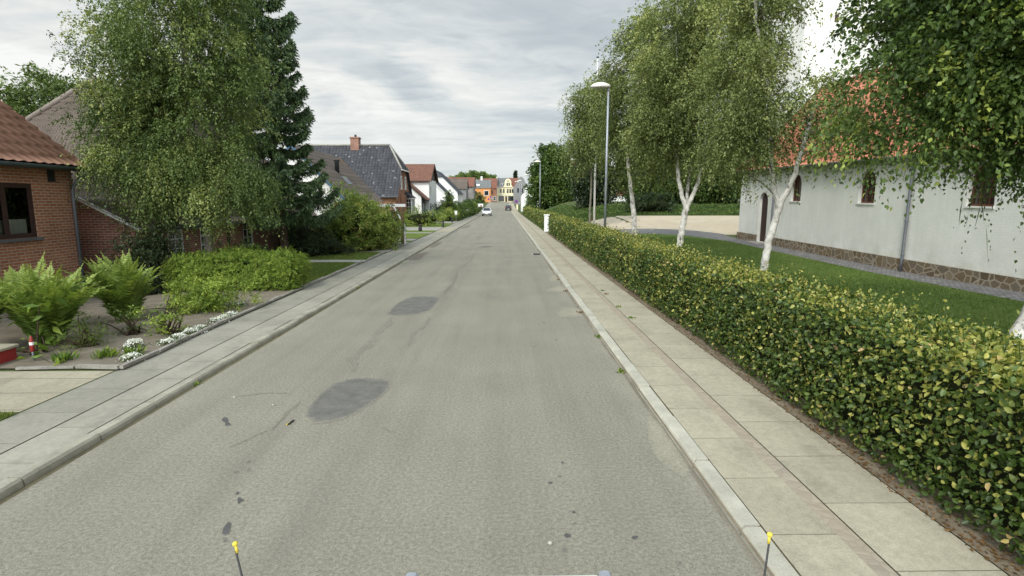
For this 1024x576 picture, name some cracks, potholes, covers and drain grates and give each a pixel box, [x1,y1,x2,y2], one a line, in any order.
crack [441,249,474,296]
crack [229,392,301,447]
crack [346,316,430,372]
